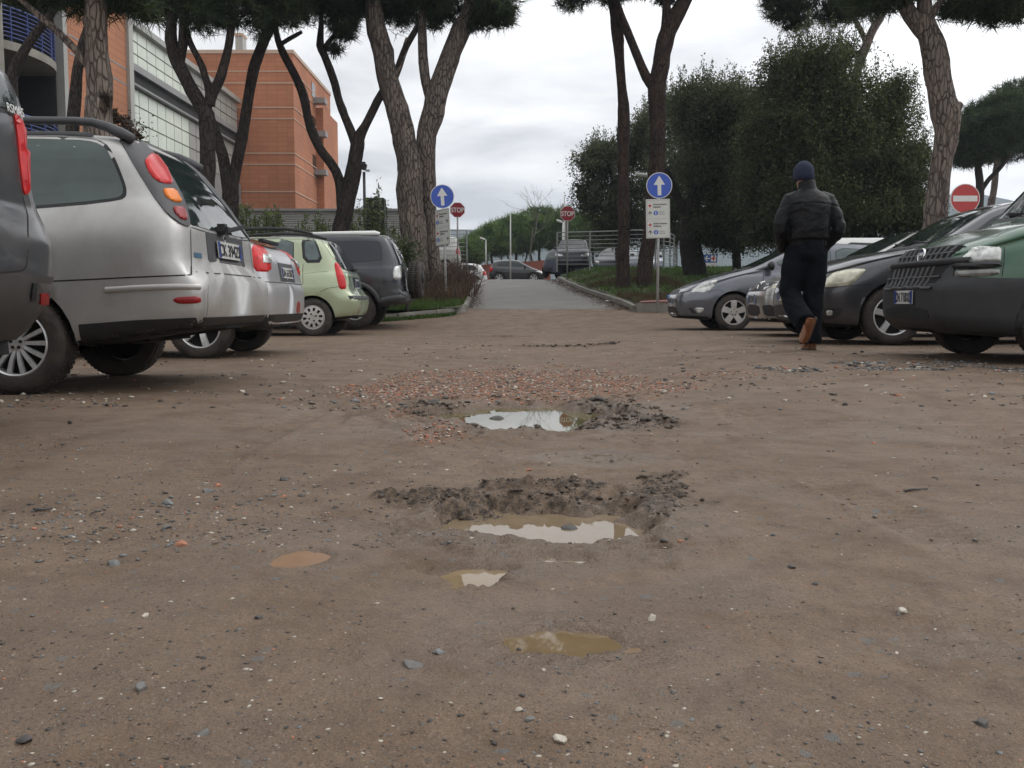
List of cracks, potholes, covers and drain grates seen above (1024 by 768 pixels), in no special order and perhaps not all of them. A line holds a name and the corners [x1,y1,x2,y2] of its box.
pothole [483,613,679,665]
pothole [315,457,735,560]
pothole [350,394,745,438]
